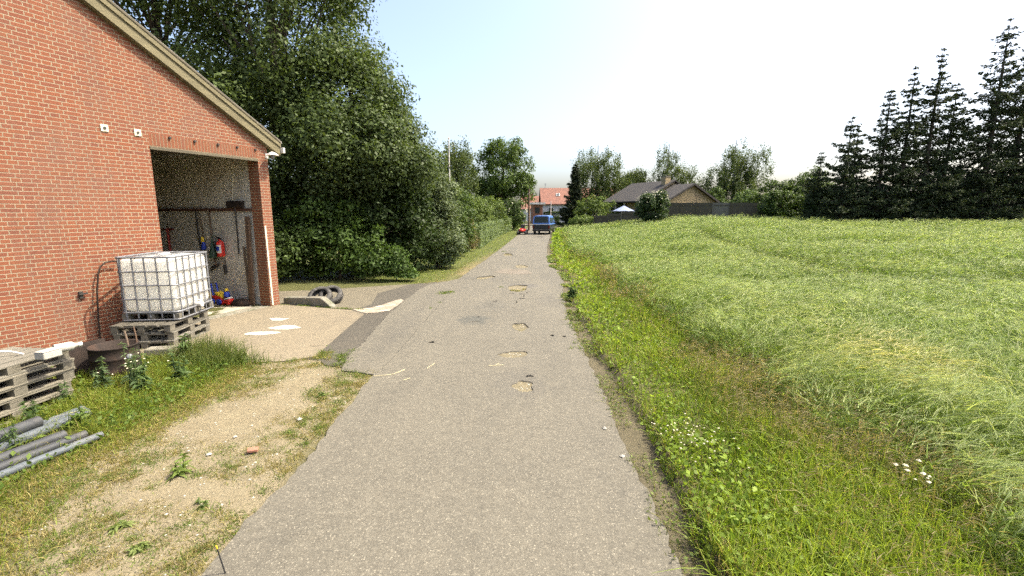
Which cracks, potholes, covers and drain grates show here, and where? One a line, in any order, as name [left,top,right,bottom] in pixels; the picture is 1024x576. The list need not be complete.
pothole [511,380,533,392]
